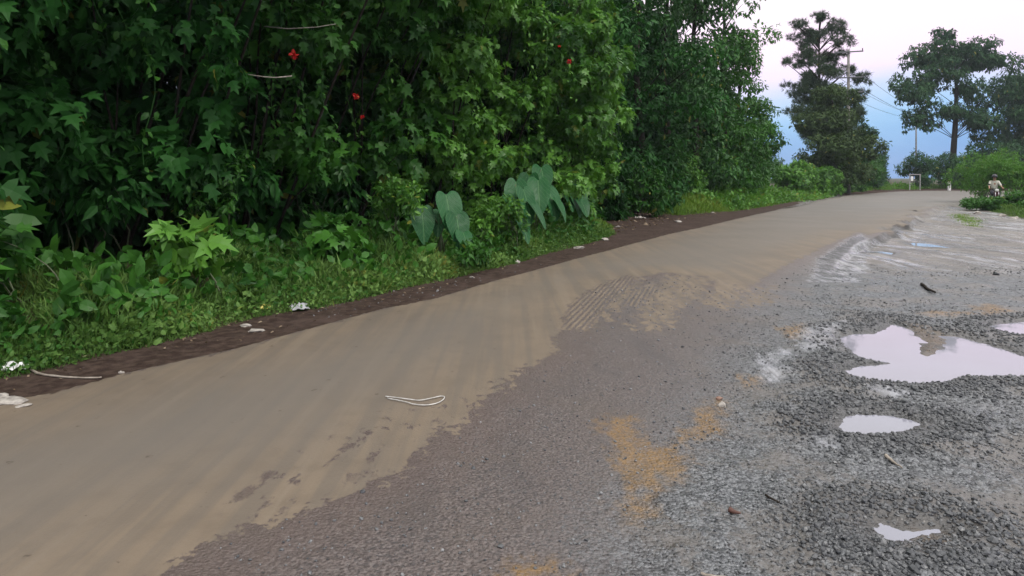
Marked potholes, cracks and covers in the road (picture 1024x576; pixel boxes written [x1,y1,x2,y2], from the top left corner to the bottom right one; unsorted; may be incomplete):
pothole [829,408,931,433]
pothole [831,320,1024,381]
pothole [857,510,967,544]
